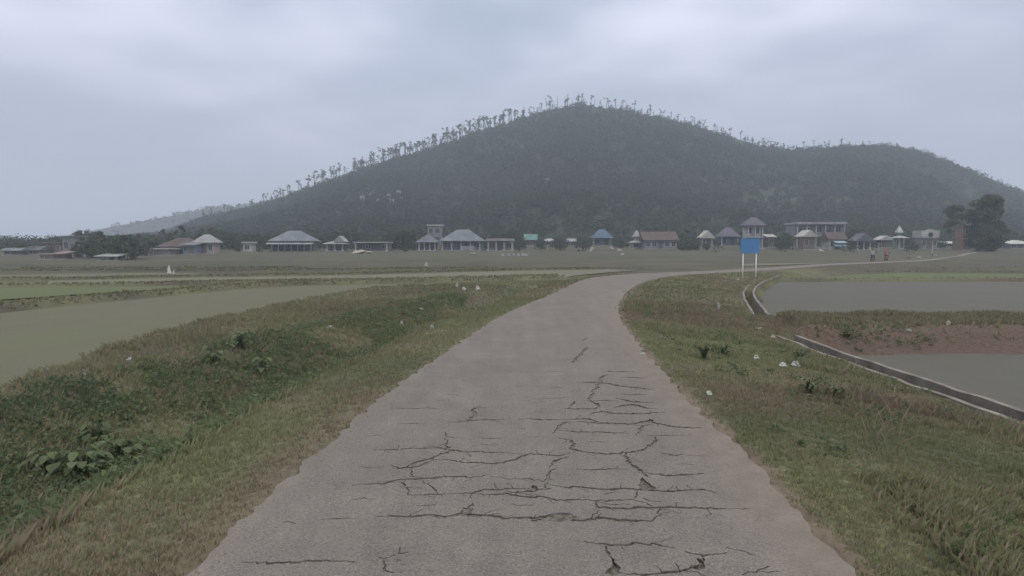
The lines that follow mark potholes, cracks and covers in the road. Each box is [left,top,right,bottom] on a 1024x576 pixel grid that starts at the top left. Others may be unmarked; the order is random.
crack [352,338,780,576]
